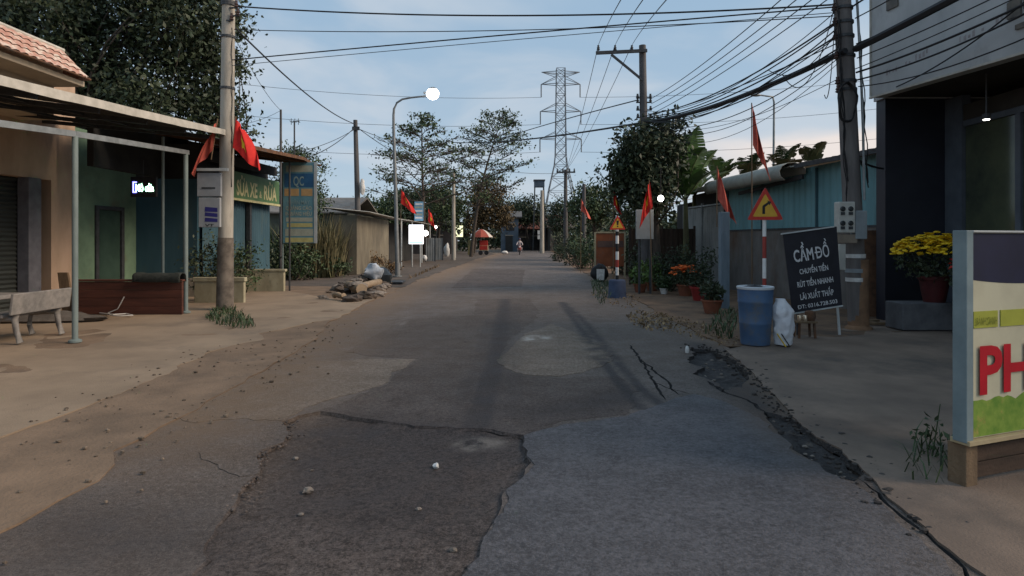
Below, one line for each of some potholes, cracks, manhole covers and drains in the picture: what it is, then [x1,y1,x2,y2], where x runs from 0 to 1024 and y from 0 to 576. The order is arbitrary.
pothole [687,348,749,392]
crack [630,345,686,400]
pothole [764,412,864,481]
